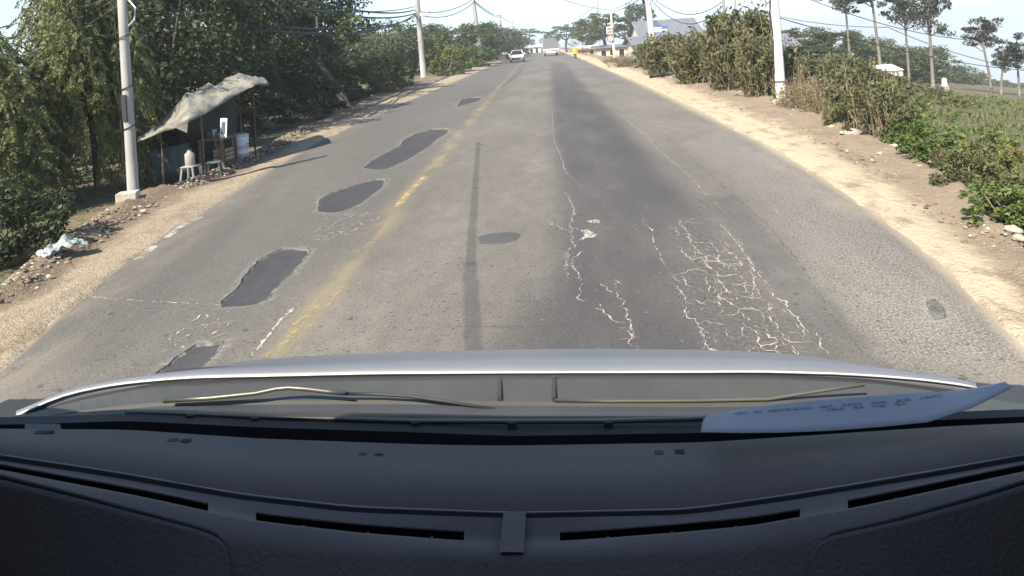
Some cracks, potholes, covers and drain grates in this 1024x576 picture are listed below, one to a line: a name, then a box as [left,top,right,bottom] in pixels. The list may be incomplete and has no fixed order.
crack [596,281,638,347]
crack [549,116,600,301]
crack [88,296,233,354]
crack [670,218,829,355]
